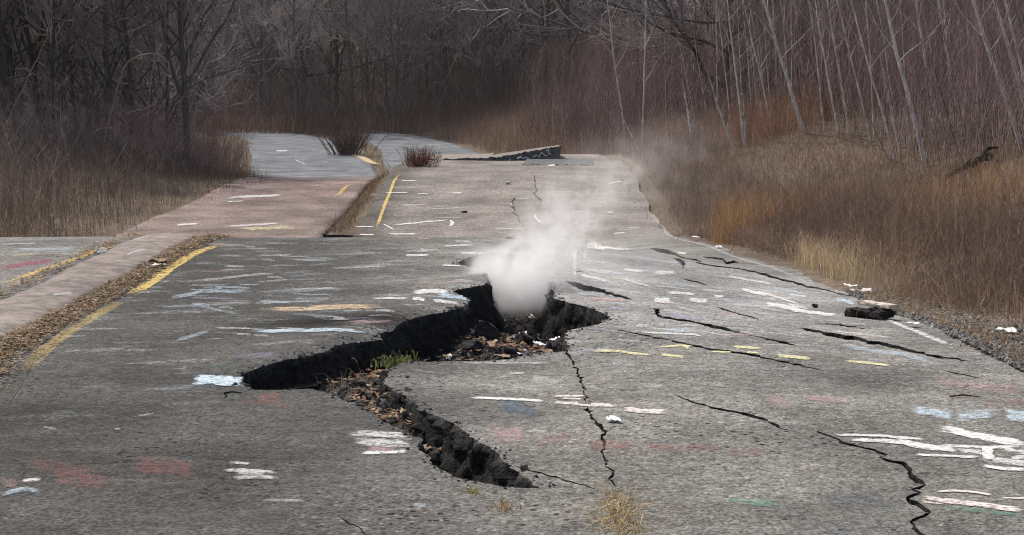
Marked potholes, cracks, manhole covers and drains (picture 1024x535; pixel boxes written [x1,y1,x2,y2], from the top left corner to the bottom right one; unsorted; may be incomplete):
crack [817,431,931,535]
crack [224,175,978,490]
